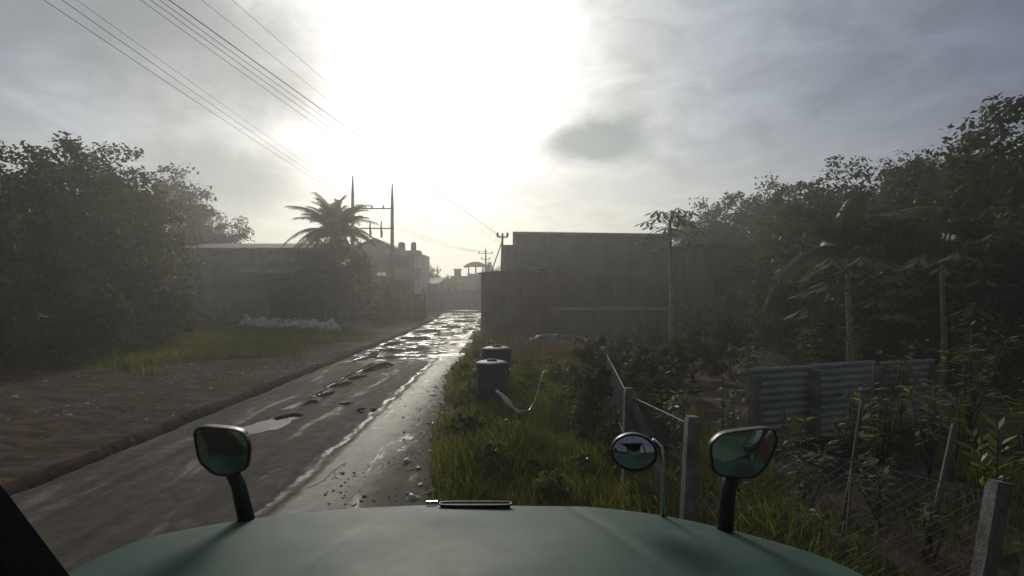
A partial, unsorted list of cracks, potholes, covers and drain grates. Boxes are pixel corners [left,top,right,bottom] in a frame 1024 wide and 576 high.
pothole [267,412,309,421]
pothole [311,390,340,399]
pothole [324,381,357,389]
pothole [359,362,398,374]
